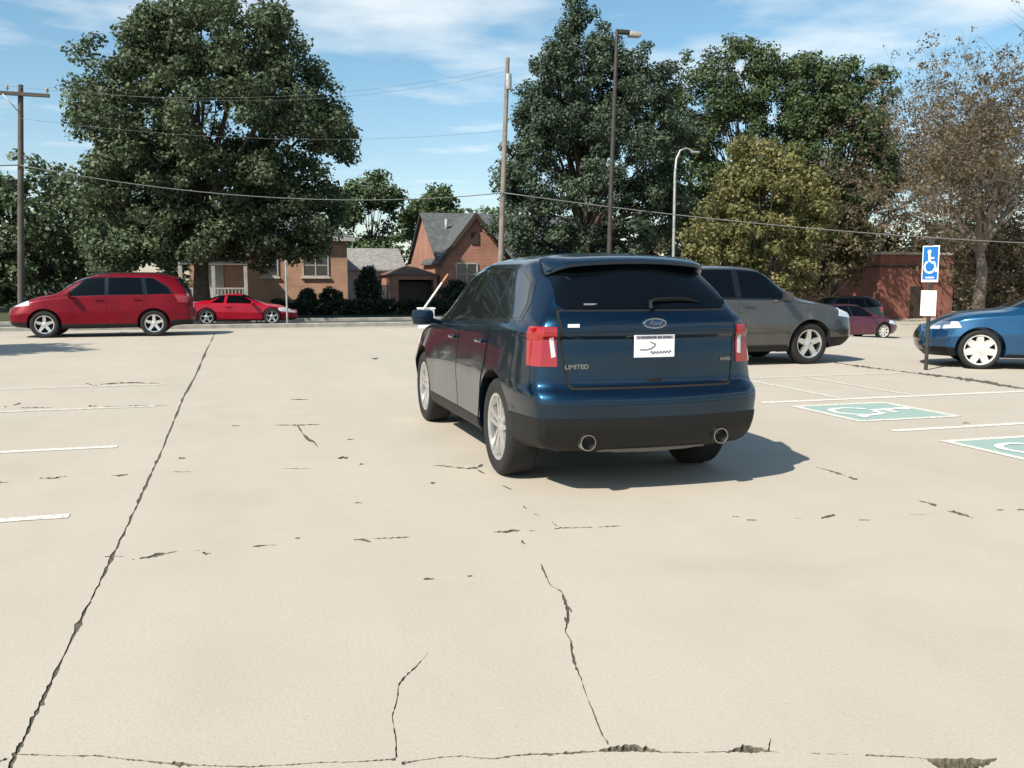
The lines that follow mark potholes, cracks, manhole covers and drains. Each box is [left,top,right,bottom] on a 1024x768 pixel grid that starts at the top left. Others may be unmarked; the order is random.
crack [920,501,972,518]
crack [0,474,128,483]
crack [433,464,485,474]
crack [0,485,926,768]
crack [280,424,320,447]
